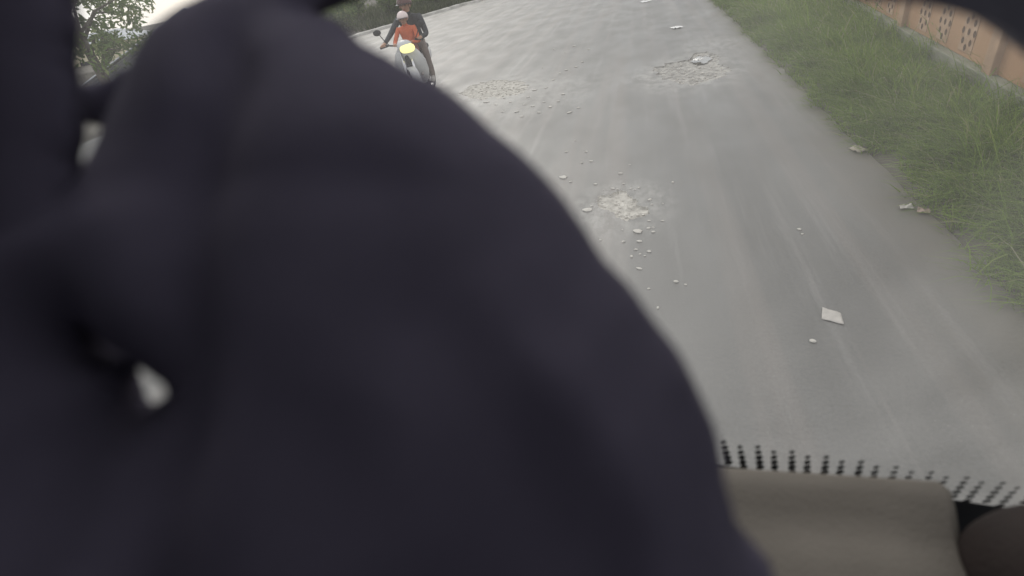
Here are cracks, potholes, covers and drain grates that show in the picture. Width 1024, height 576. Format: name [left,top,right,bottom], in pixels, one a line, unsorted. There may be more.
pothole [597,190,650,221]
pothole [652,51,733,86]
pothole [459,80,529,100]
